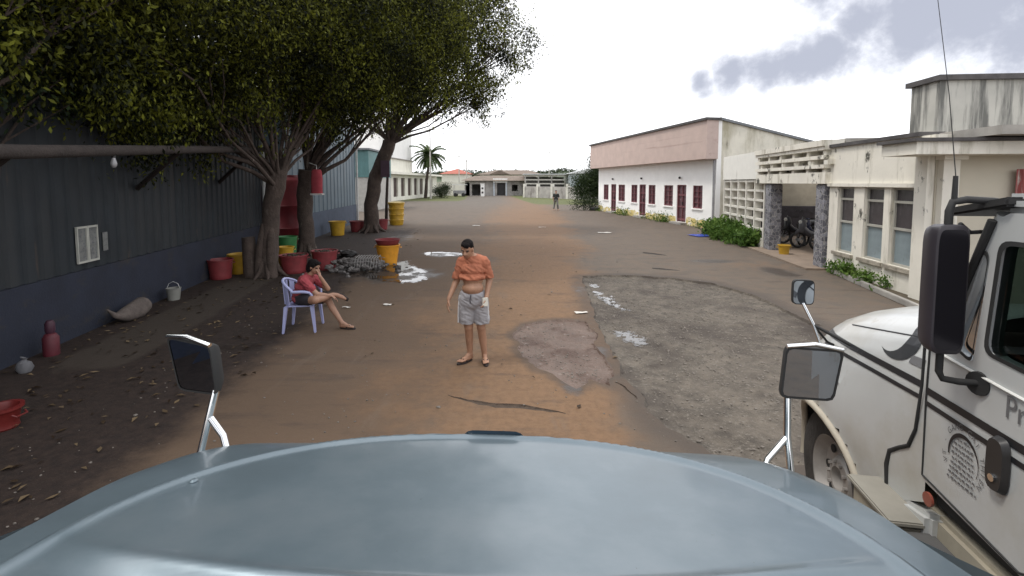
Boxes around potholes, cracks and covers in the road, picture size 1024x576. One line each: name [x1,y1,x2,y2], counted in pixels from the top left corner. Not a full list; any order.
crack [448,395,566,414]
